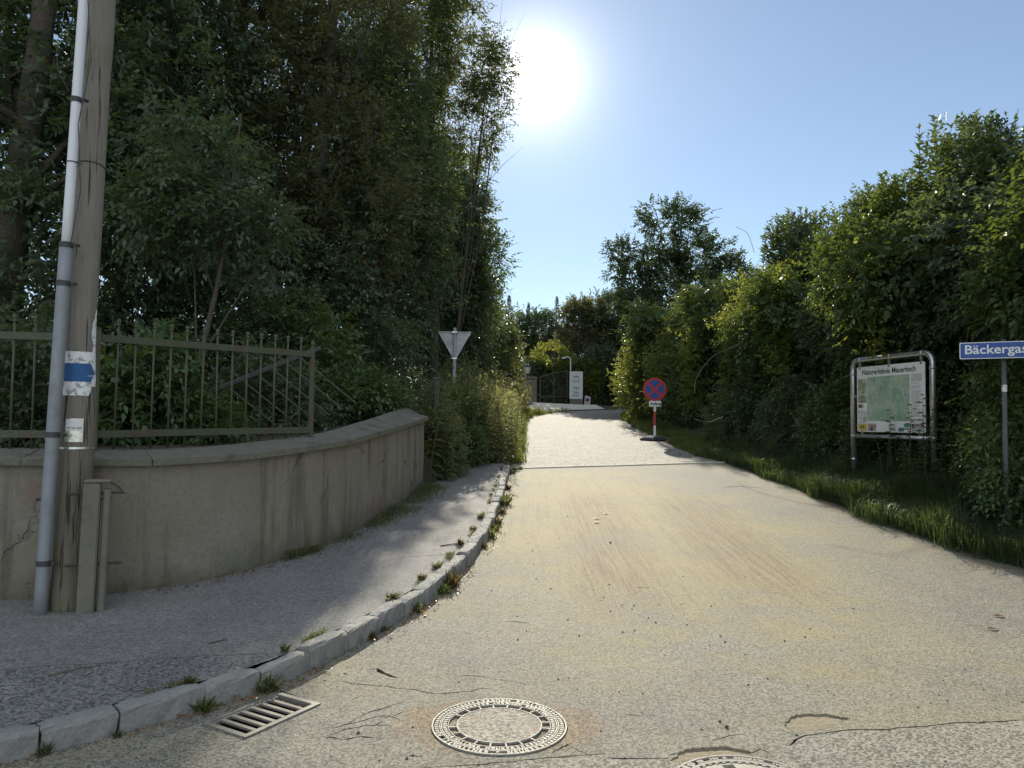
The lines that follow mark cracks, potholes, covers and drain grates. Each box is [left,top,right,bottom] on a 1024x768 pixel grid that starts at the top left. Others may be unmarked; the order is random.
crack [322,668,533,740]
manhole cover [431,698,567,756]
drain grate [202,692,321,739]
pothole [784,713,850,731]
manhole cover [677,755,795,768]
